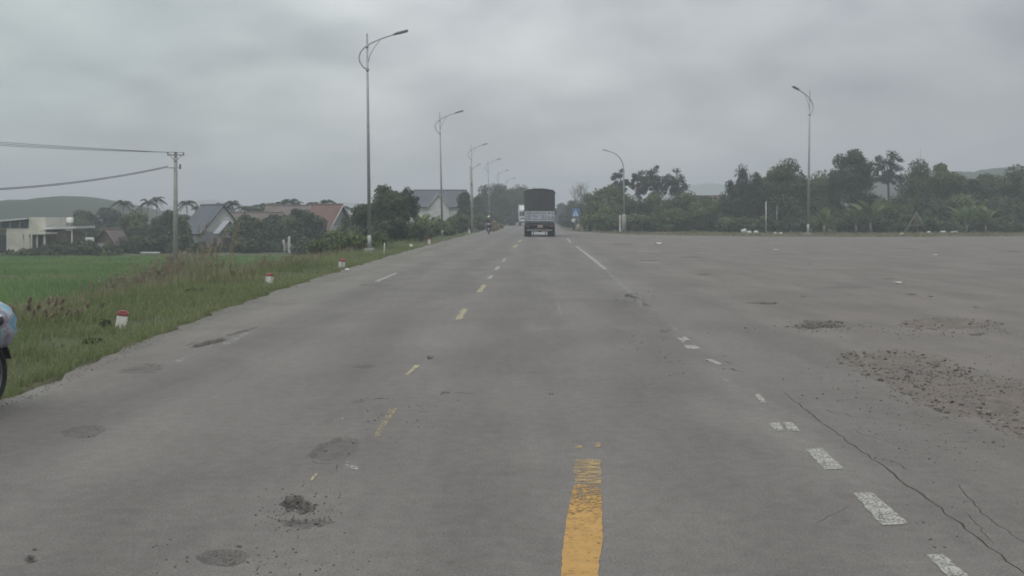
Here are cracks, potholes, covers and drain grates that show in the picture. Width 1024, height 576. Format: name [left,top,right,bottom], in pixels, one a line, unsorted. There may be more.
crack [959,484,1024,543]
pothole [277,518,336,529]
pothole [784,319,850,329]
pothole [279,495,317,515]
pothole [836,347,1024,442]
